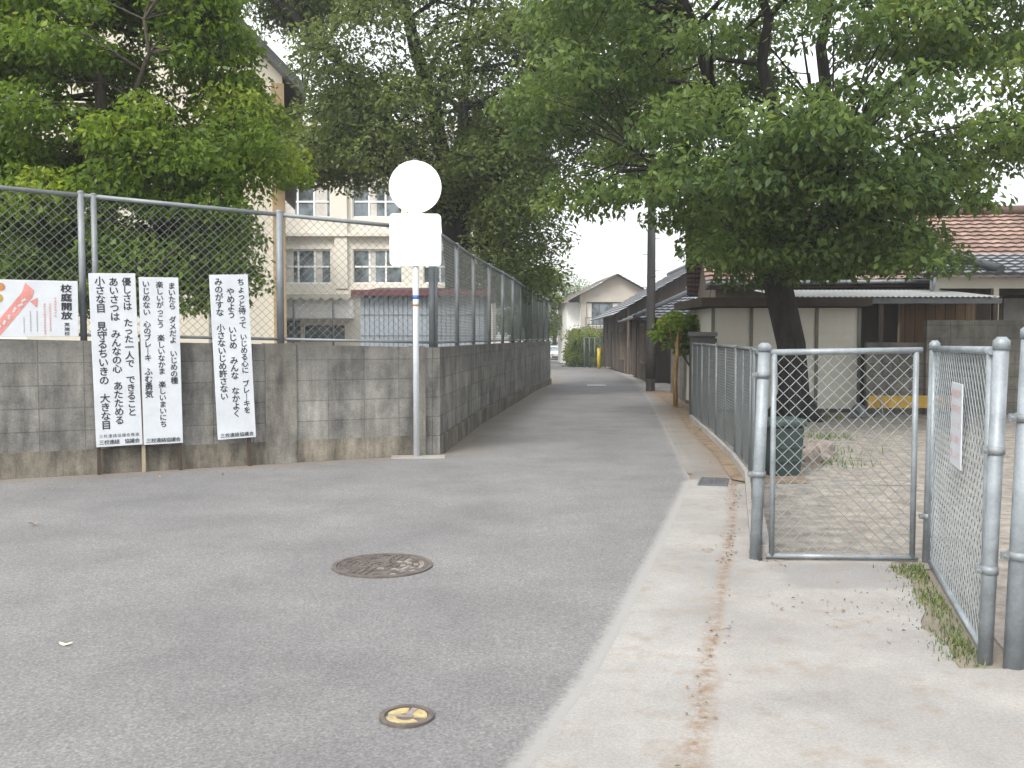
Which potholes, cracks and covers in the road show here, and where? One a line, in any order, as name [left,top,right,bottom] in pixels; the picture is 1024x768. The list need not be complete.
utility cover [379,704,434,729]
drain grate [698,477,729,487]
manhole cover [332,553,433,579]
